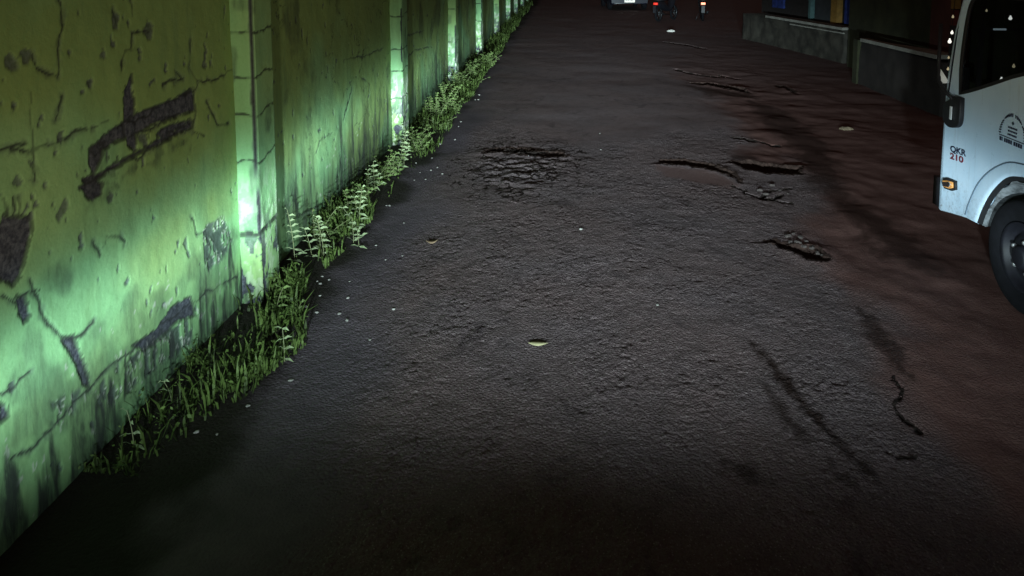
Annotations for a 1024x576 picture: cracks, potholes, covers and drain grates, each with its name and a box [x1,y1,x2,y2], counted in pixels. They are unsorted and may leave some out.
crack [673,69,741,80]
crack [887,376,923,435]
crack [731,137,781,147]
pothole [481,147,569,158]
pothole [762,238,832,262]
crack [886,452,918,460]
